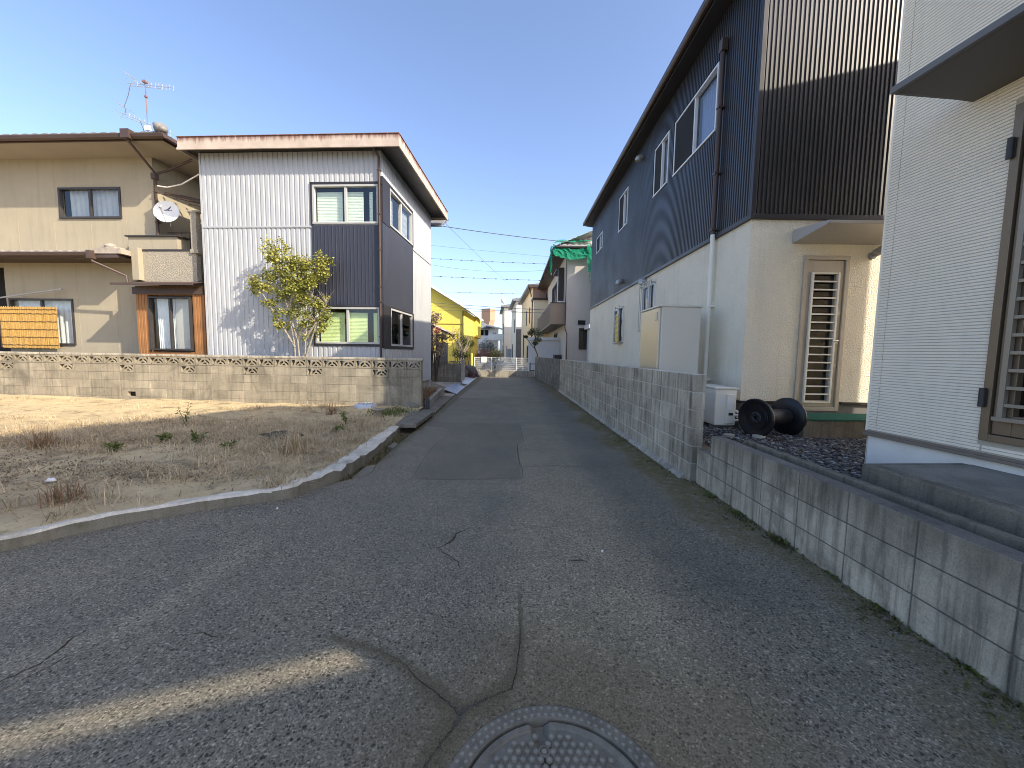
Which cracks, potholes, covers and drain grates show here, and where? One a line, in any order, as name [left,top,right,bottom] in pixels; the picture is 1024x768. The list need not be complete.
crack [430,529,482,585]
manhole cover [448,705,659,768]
crack [0,630,111,691]
crack [321,607,521,768]
